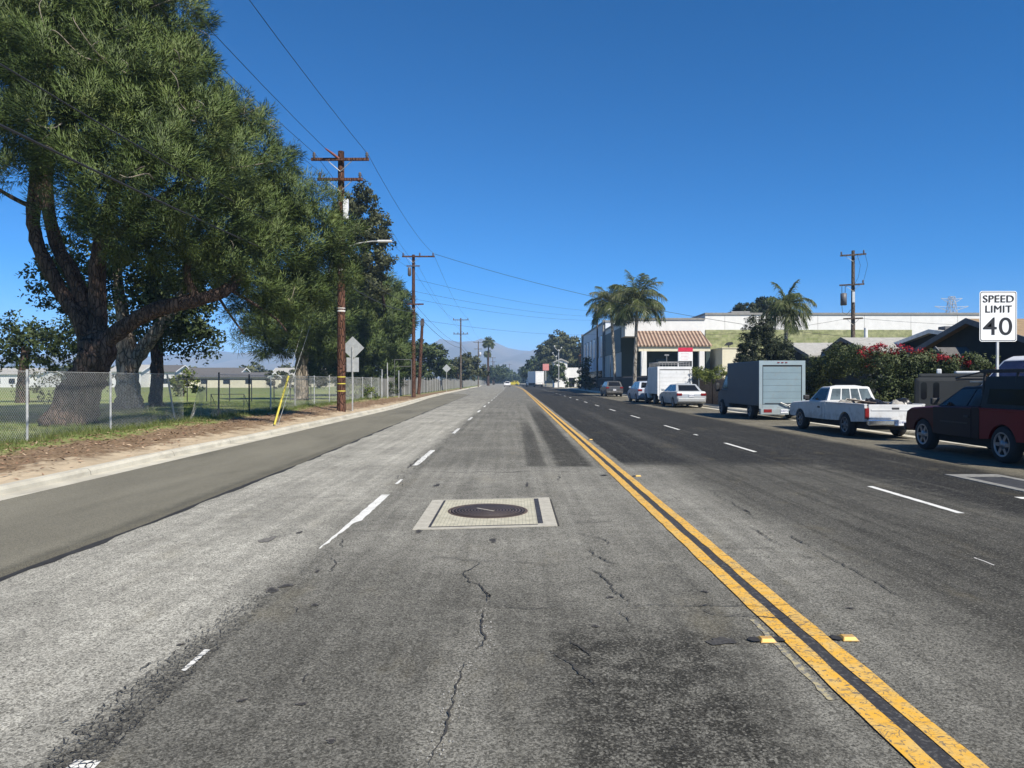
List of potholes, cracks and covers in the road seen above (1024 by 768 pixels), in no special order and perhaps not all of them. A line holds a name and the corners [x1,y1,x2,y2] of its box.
manhole cover [448,503,528,519]
crack [579,521,795,622]
crack [416,556,561,768]
crack [551,639,597,685]
